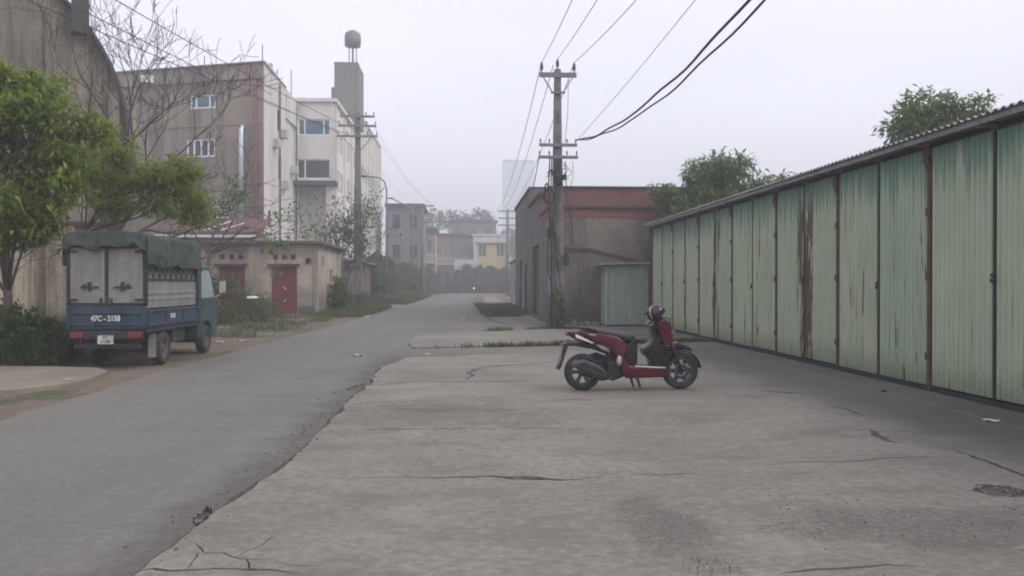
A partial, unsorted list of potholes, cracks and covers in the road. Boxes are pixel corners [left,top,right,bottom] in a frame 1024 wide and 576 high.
crack [121,360,448,576]
pothole [192,506,212,527]
pothole [971,484,1024,497]
crack [777,564,911,575]
crack [462,362,549,381]
crack [773,405,1024,477]
